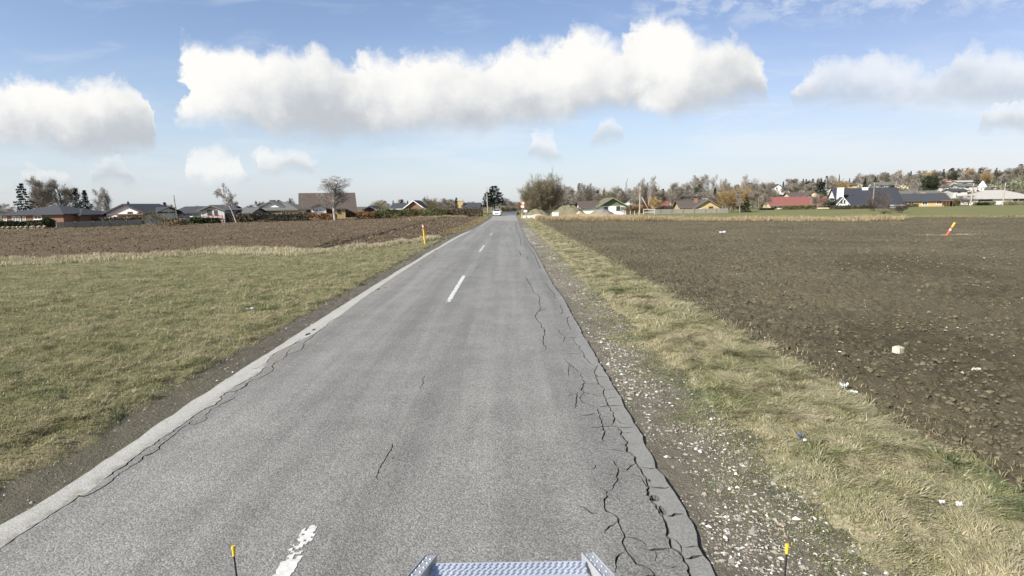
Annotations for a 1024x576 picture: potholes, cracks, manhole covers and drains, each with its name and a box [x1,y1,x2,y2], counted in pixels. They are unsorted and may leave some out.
crack [515,222,703,576]
